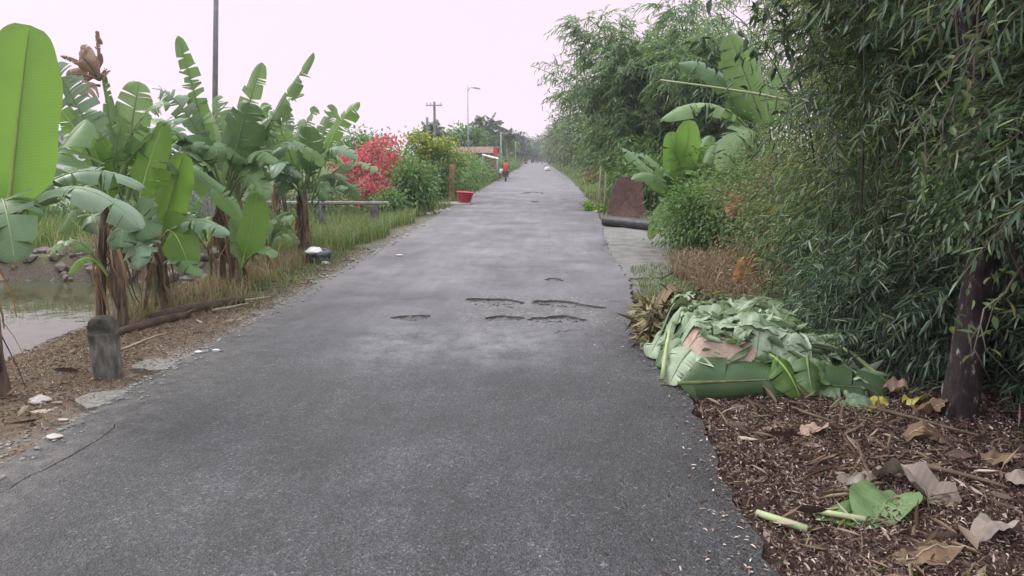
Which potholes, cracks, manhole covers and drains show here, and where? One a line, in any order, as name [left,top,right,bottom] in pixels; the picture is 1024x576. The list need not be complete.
pothole [527,315,587,323]
pothole [532,300,607,311]
crack [1,423,116,493]
pothole [466,298,525,309]
